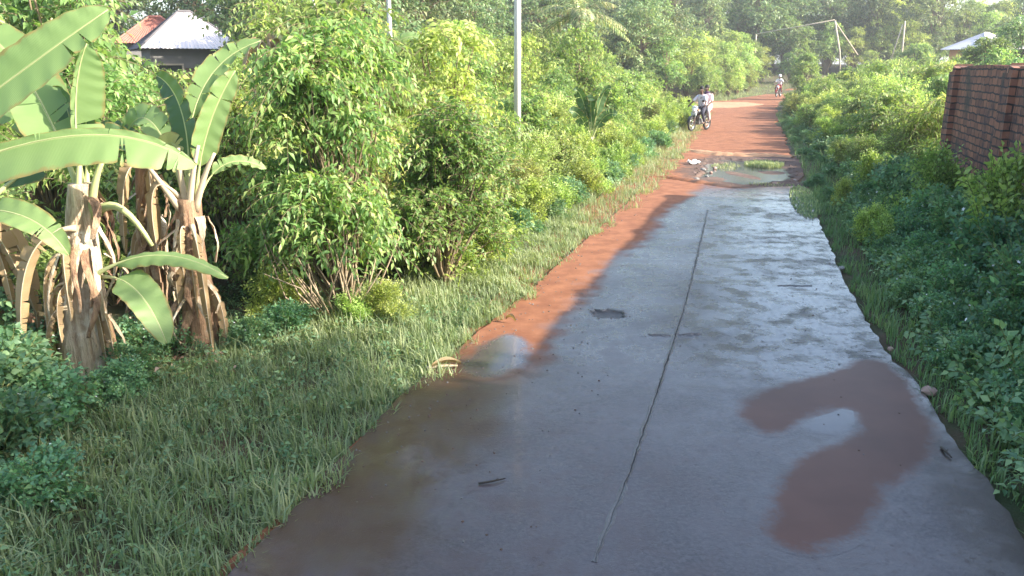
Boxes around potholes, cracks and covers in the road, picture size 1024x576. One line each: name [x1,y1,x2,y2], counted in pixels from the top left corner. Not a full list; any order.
pothole [692,156,802,186]
pothole [589,307,627,319]
